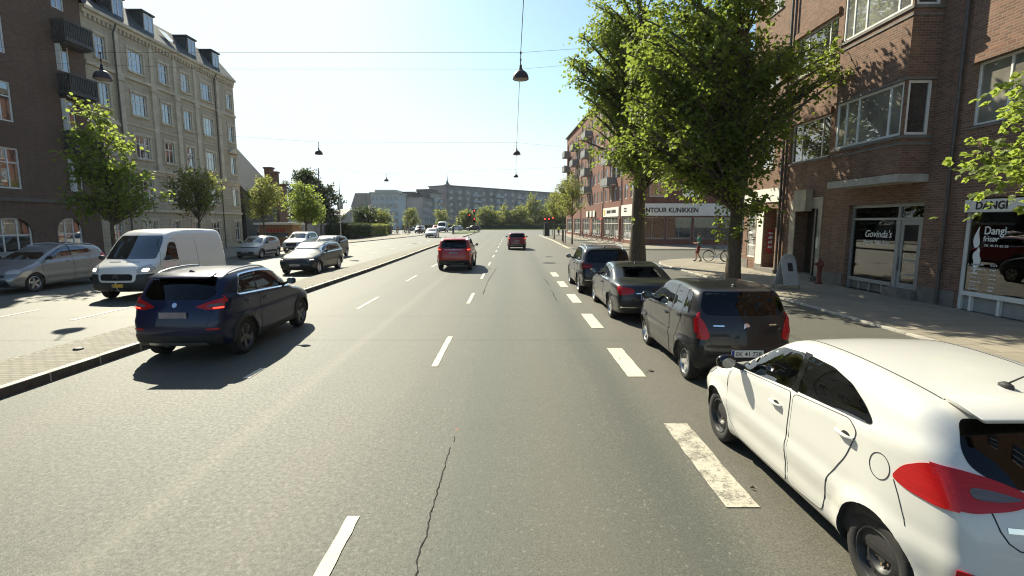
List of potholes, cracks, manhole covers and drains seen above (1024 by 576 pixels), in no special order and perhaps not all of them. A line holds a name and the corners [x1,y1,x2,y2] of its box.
crack [414,436,455,576]
